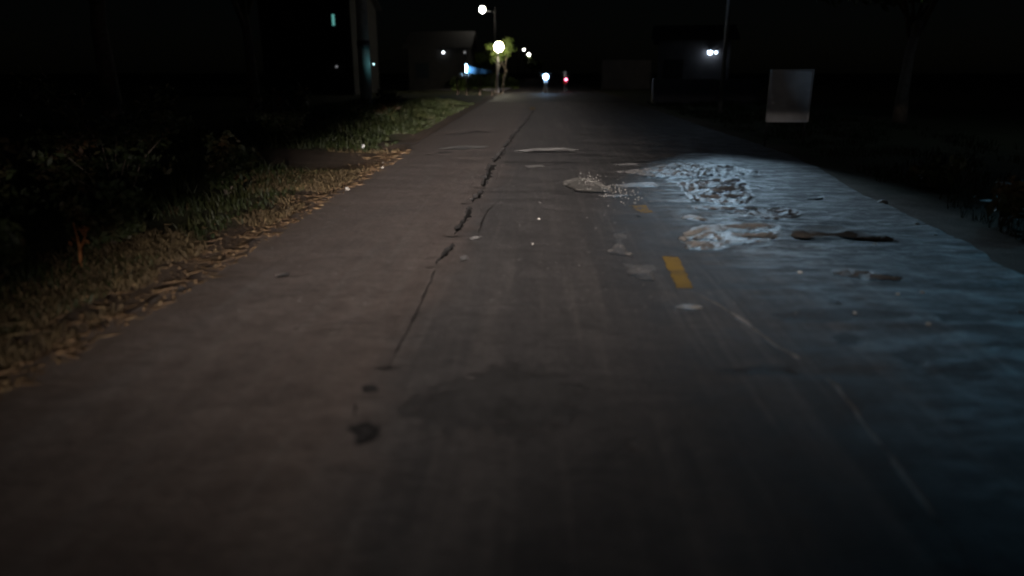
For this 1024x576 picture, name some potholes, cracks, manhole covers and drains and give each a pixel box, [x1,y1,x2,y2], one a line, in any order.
crack [383,142,595,165]
pothole [670,177,764,206]
pothole [668,220,791,252]
crack [297,188,503,368]
pothole [672,213,717,223]
pothole [681,204,814,221]
